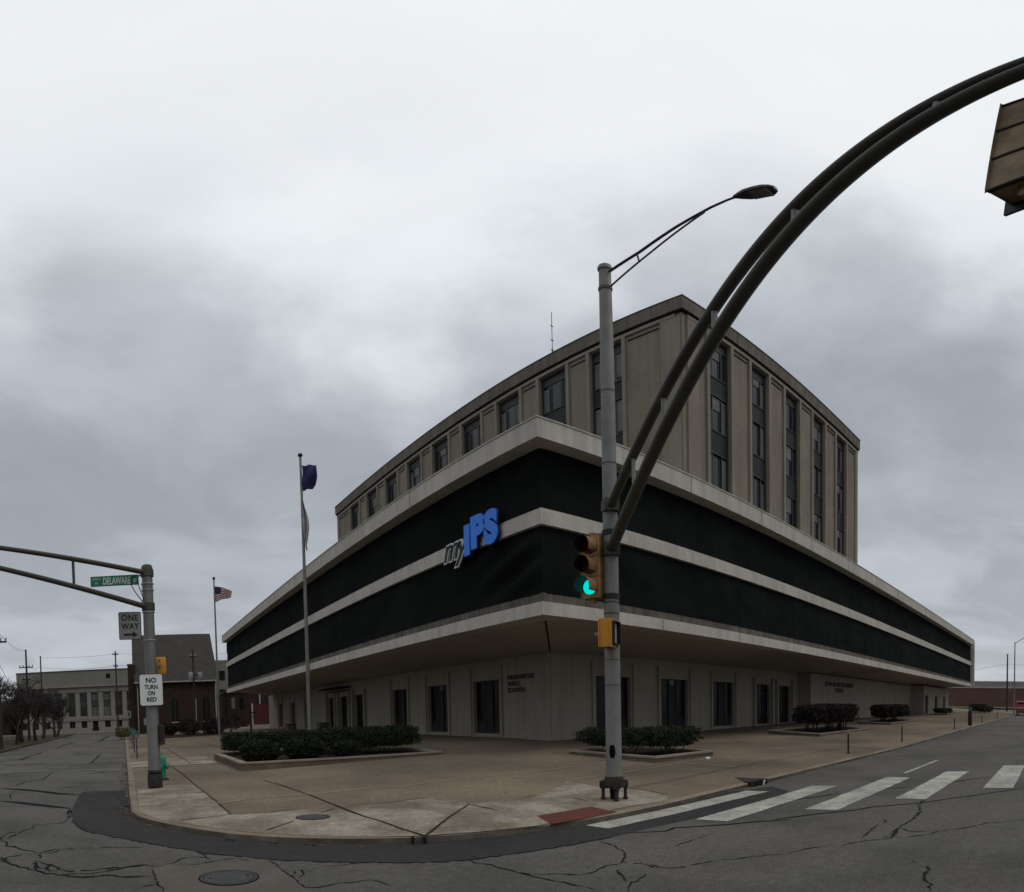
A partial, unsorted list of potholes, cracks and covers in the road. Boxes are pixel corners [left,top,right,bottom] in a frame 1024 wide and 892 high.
manhole cover [198,870,259,885]
drain grate [736,777,768,787]
crack [0,799,1021,890]
